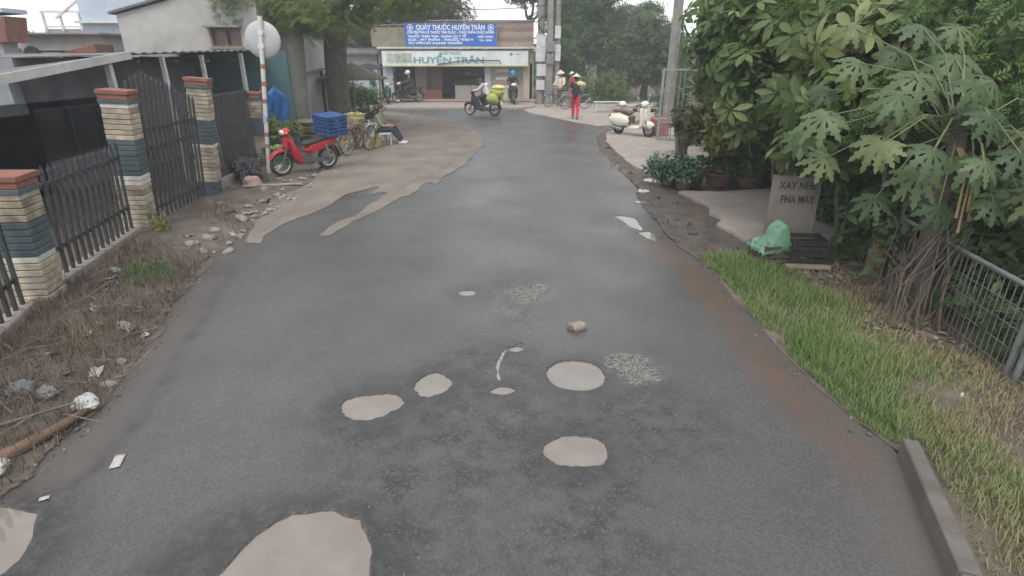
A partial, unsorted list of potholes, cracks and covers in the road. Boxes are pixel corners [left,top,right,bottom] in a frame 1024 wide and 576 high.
pothole [340,393,406,420]
pothole [413,372,453,397]
pothole [214,508,373,576]
pothole [490,387,515,395]
pothole [545,359,606,391]
pothole [603,352,664,386]
pothole [543,435,608,466]
crack [496,342,523,380]
pothole [0,505,38,575]
pothole [509,283,551,302]
